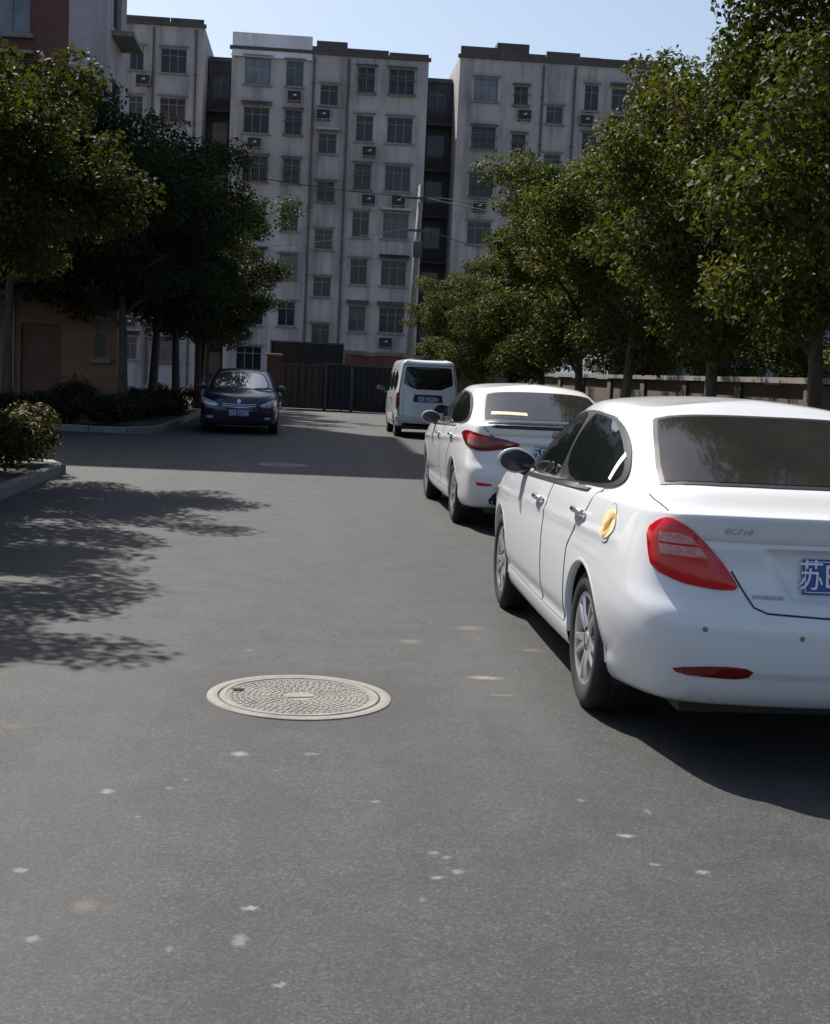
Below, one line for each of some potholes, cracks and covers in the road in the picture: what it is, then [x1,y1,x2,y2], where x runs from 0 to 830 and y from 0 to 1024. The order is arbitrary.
manhole cover [206,675,391,721]
